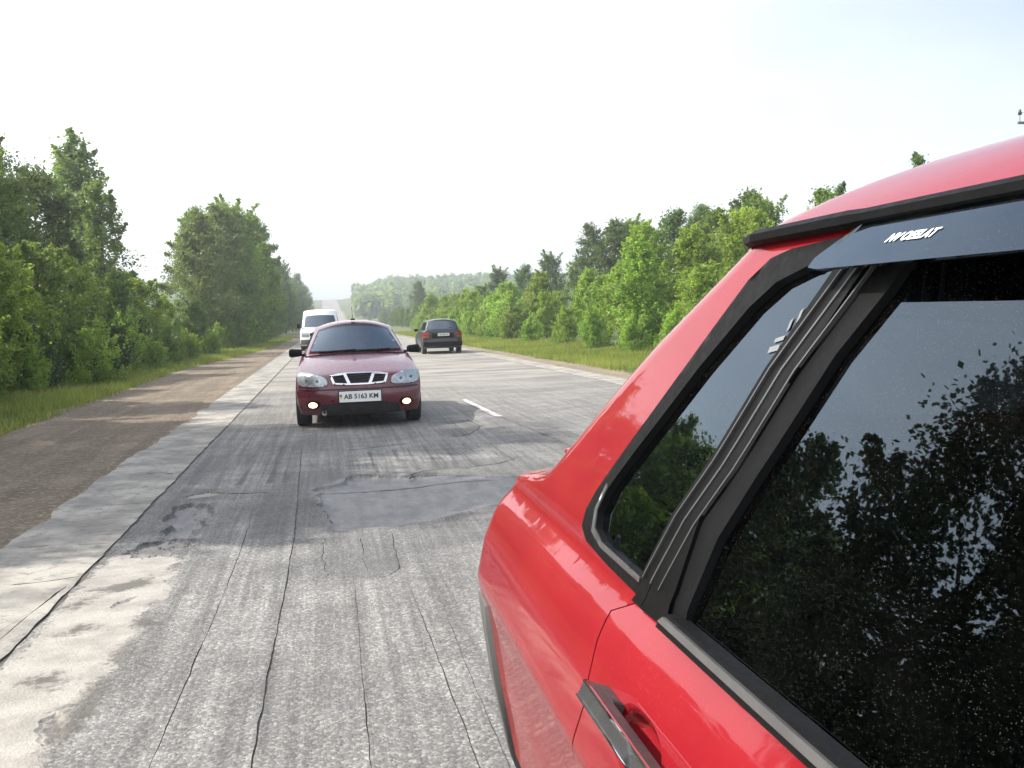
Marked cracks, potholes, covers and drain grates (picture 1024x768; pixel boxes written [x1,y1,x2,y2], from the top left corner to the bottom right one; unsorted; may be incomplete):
pothole [120,538,203,559]
crack [149,492,270,767]
crack [2,576,79,638]
crack [251,452,518,768]
pothole [150,501,215,536]
